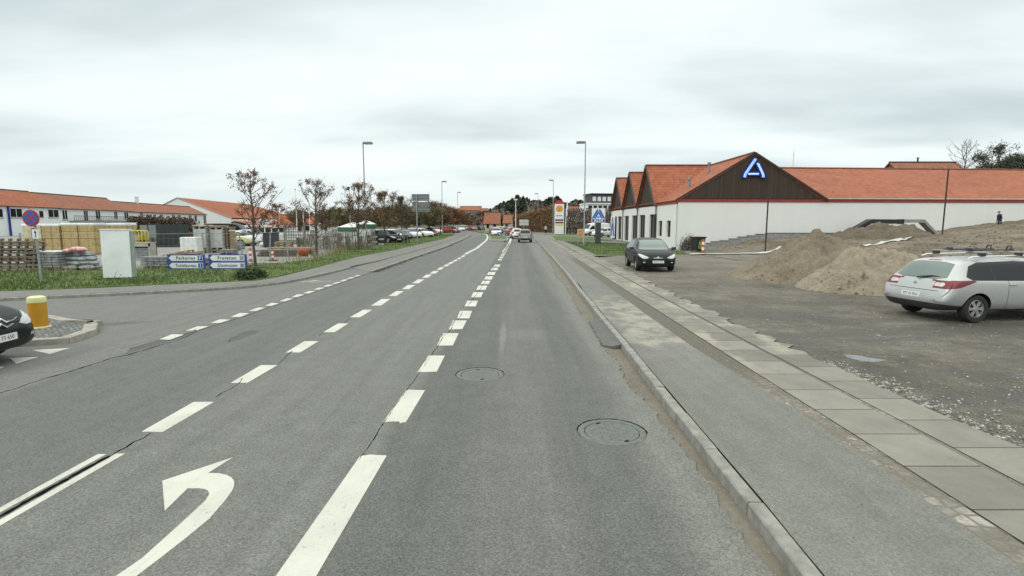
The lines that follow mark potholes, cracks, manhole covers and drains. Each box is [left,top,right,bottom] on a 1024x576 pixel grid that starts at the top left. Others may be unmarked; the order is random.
manhole cover [455,367,504,381]
manhole cover [576,419,648,446]
